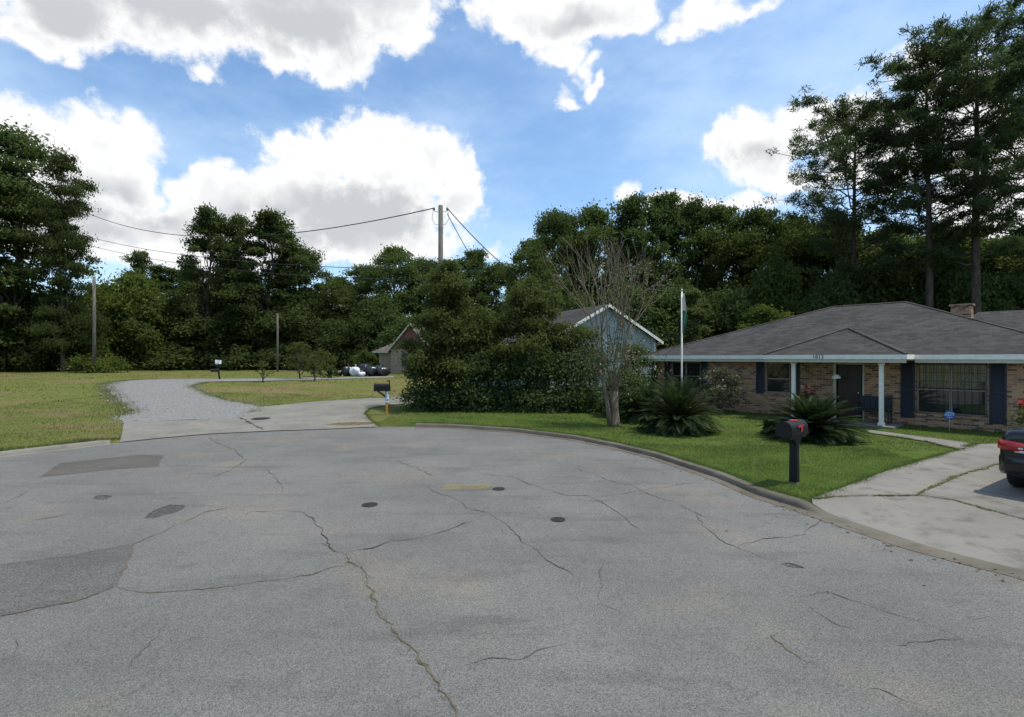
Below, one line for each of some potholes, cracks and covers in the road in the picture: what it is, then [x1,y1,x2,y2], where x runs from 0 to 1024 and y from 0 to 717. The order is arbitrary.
crack [1,508,558,717]
crack [800,591,960,645]
